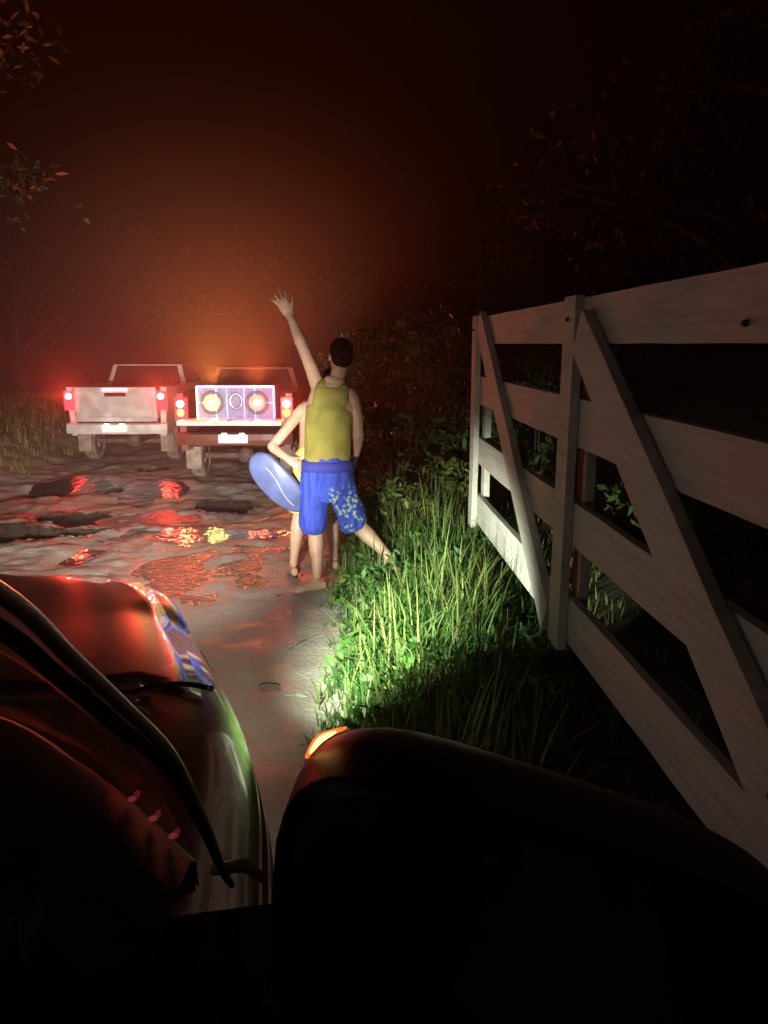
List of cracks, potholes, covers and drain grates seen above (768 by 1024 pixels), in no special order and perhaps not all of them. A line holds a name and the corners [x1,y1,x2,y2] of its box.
pothole [25,511,124,529]
pothole [0,523,122,546]
pothole [186,500,262,516]
crack [277,634,324,653]
